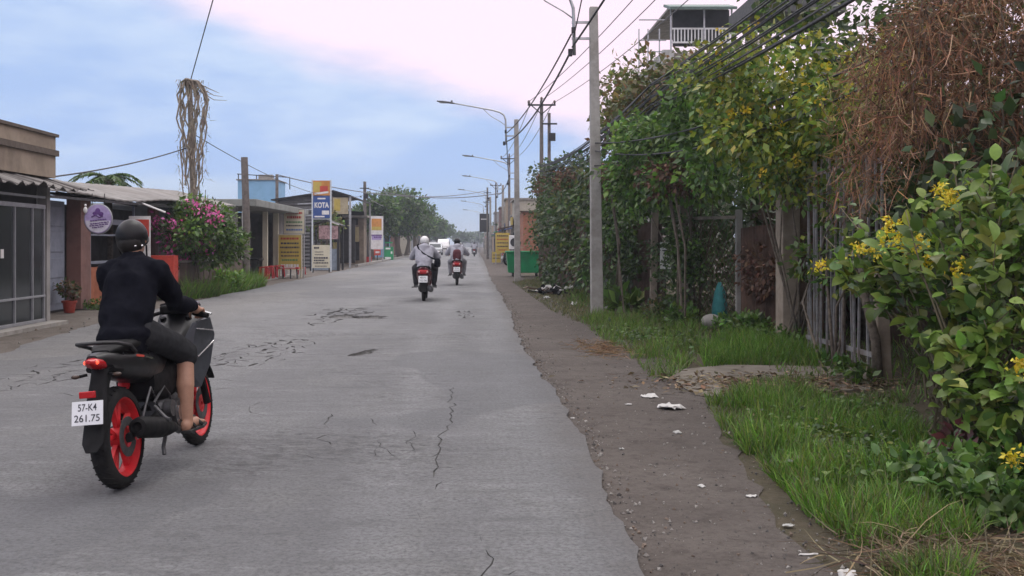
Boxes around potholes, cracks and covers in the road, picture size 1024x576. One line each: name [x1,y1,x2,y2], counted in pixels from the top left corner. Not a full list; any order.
crack [2,359,91,396]
crack [210,307,375,390]
crack [374,388,458,489]
